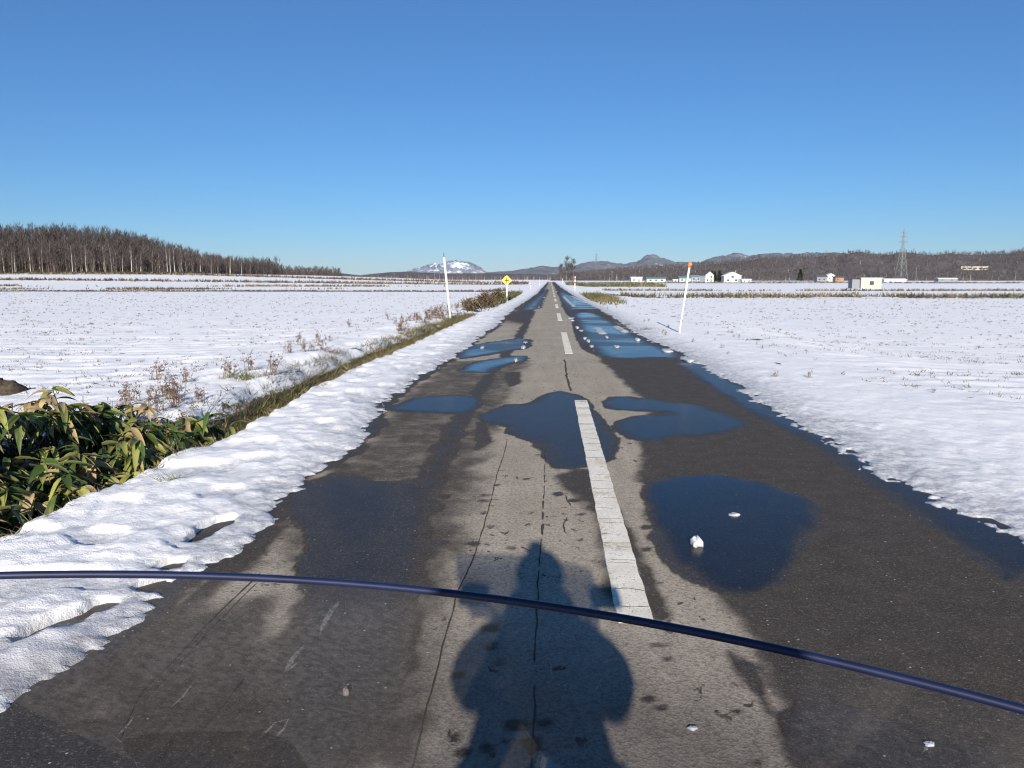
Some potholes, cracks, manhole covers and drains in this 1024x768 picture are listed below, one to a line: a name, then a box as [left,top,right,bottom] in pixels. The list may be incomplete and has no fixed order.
crack [530,447,546,768]
crack [200,679,243,731]
